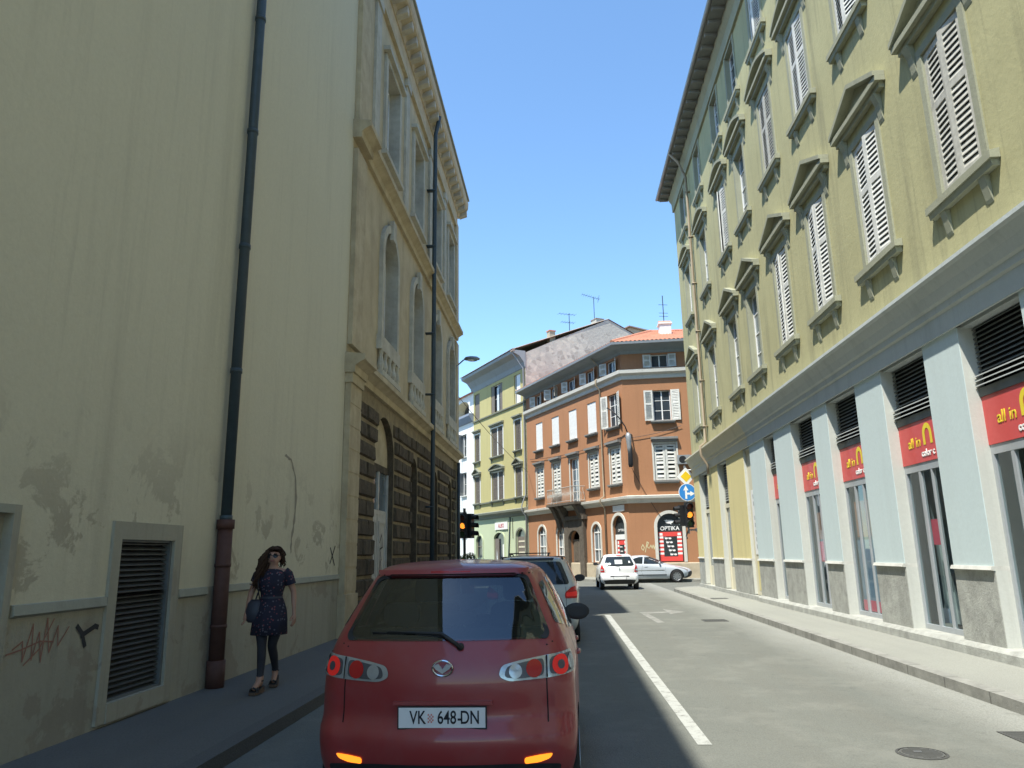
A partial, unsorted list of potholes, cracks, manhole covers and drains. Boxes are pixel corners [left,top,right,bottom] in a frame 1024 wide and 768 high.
manhole cover [895,747,949,760]
